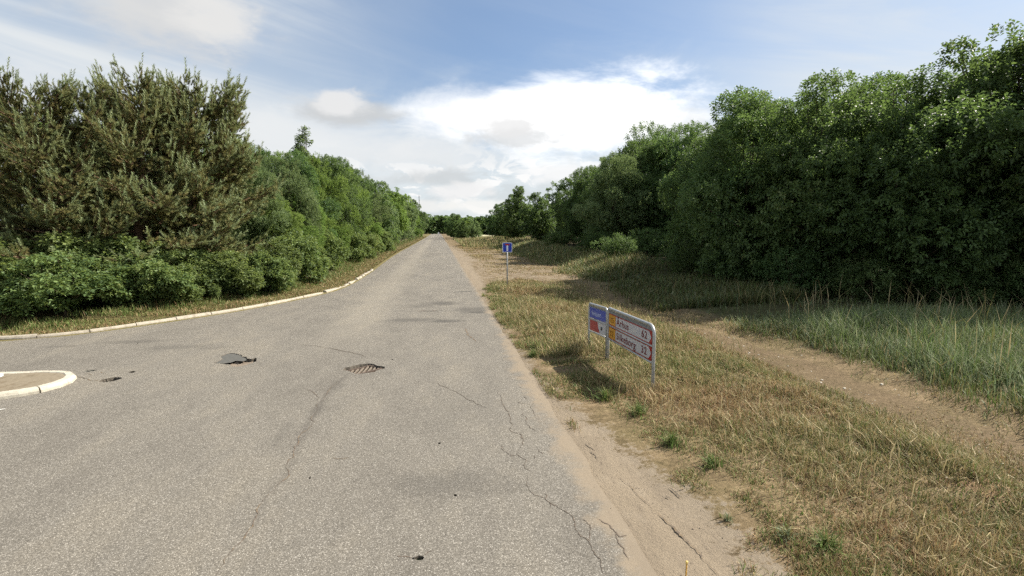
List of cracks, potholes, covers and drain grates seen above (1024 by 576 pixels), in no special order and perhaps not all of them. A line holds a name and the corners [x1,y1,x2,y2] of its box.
crack [221,385,334,567]
pothole [215,353,257,367]
crack [501,400,629,575]
